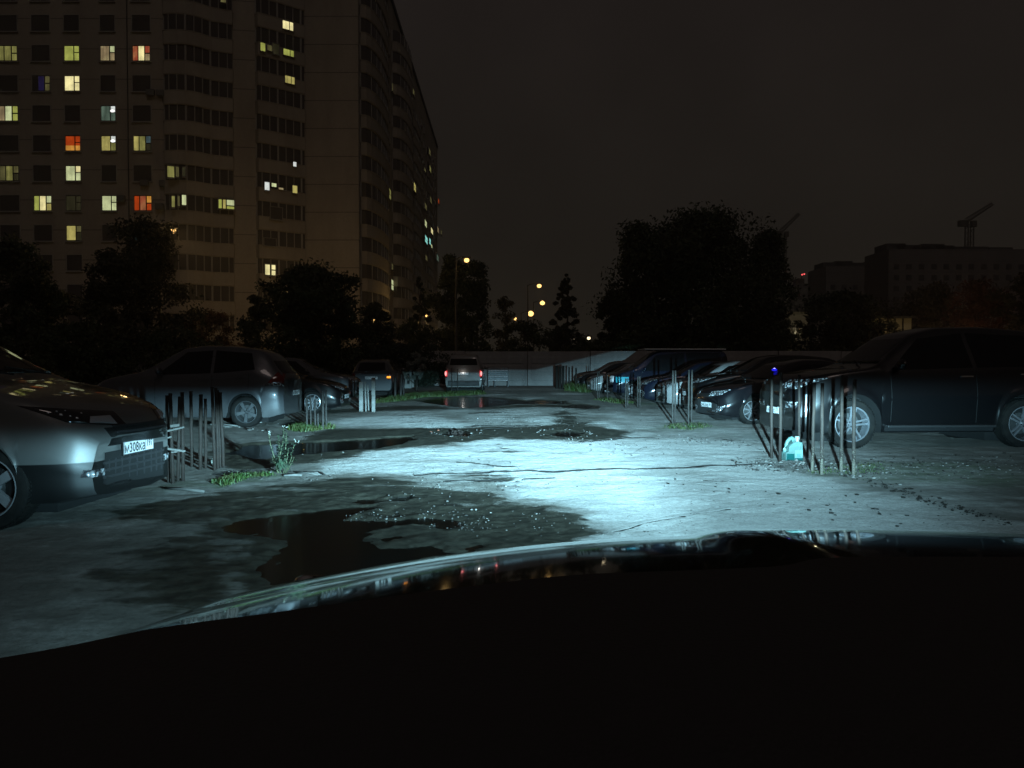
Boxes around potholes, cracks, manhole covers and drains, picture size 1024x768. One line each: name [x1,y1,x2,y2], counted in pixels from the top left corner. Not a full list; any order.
crack [414,439,770,488]
pothole [536,429,598,438]
pothole [430,428,482,437]
